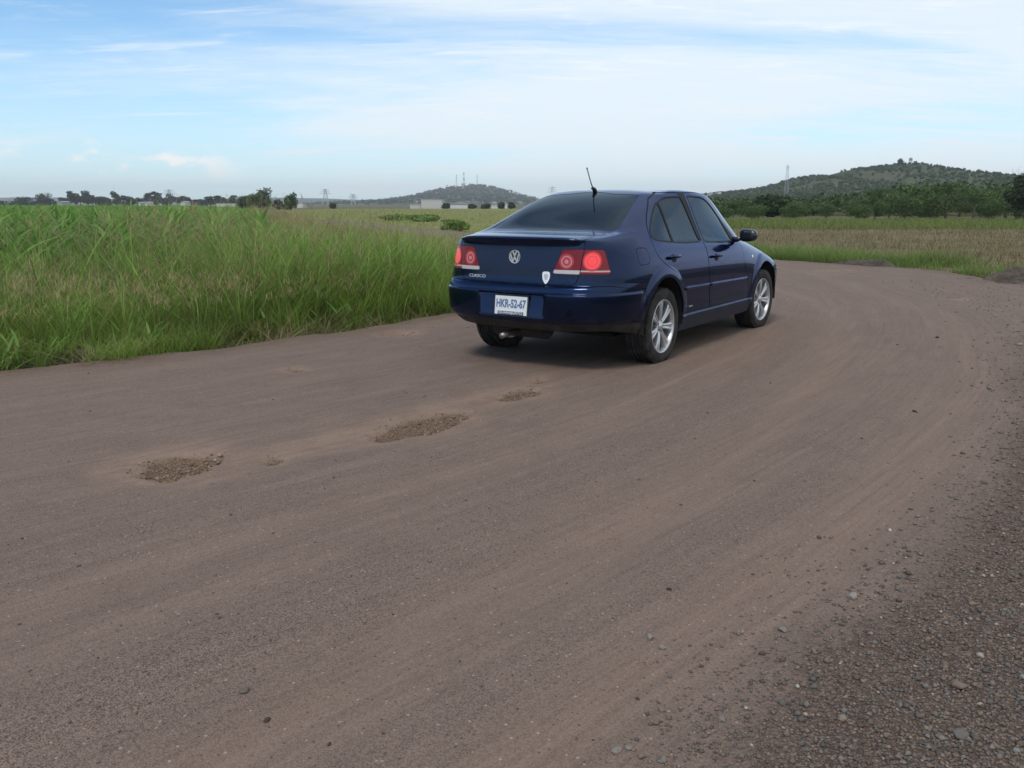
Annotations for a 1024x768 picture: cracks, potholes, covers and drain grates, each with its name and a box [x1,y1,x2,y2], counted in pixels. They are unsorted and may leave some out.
pothole [123,450,232,483]
pothole [252,451,291,466]
pothole [362,408,474,443]
pothole [487,386,546,402]
